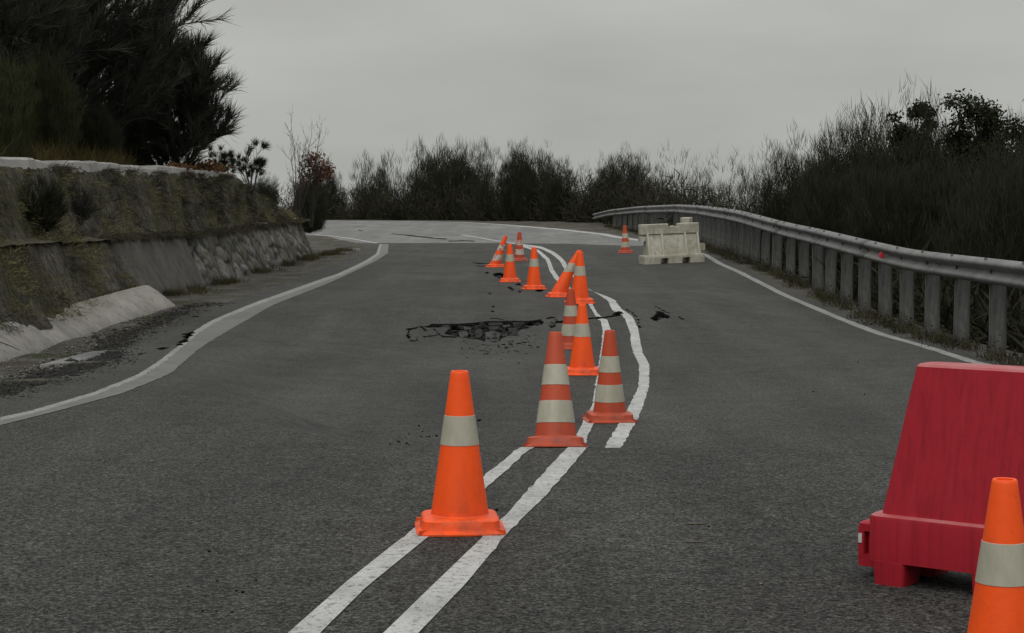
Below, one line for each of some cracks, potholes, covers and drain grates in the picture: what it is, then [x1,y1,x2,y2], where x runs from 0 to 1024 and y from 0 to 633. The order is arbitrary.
crack [546,309,643,328]
pothole [650,306,671,321]
pothole [405,318,544,343]
